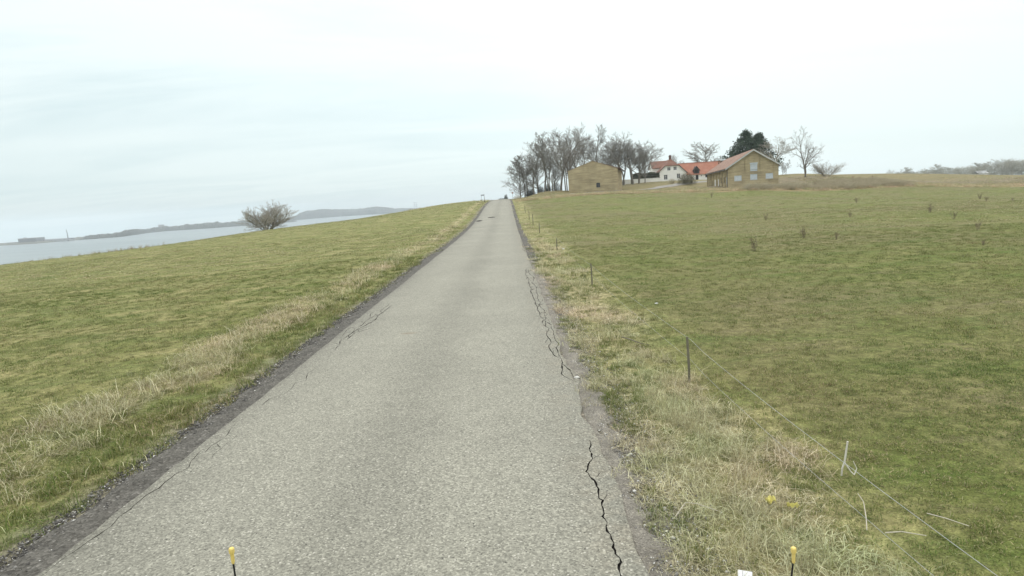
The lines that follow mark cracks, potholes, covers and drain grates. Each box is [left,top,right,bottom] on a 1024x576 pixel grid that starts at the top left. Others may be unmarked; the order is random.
crack [525,270,574,379]
crack [585,440,622,576]
